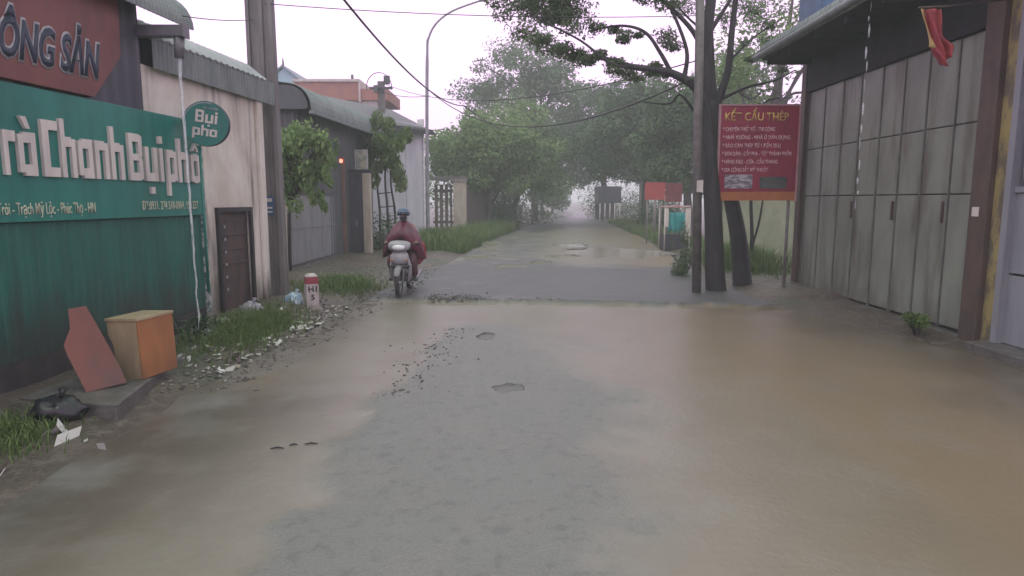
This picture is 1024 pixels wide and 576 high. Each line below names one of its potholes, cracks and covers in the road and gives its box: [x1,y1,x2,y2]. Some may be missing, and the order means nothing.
pothole [492,383,525,393]
pothole [476,332,495,340]
